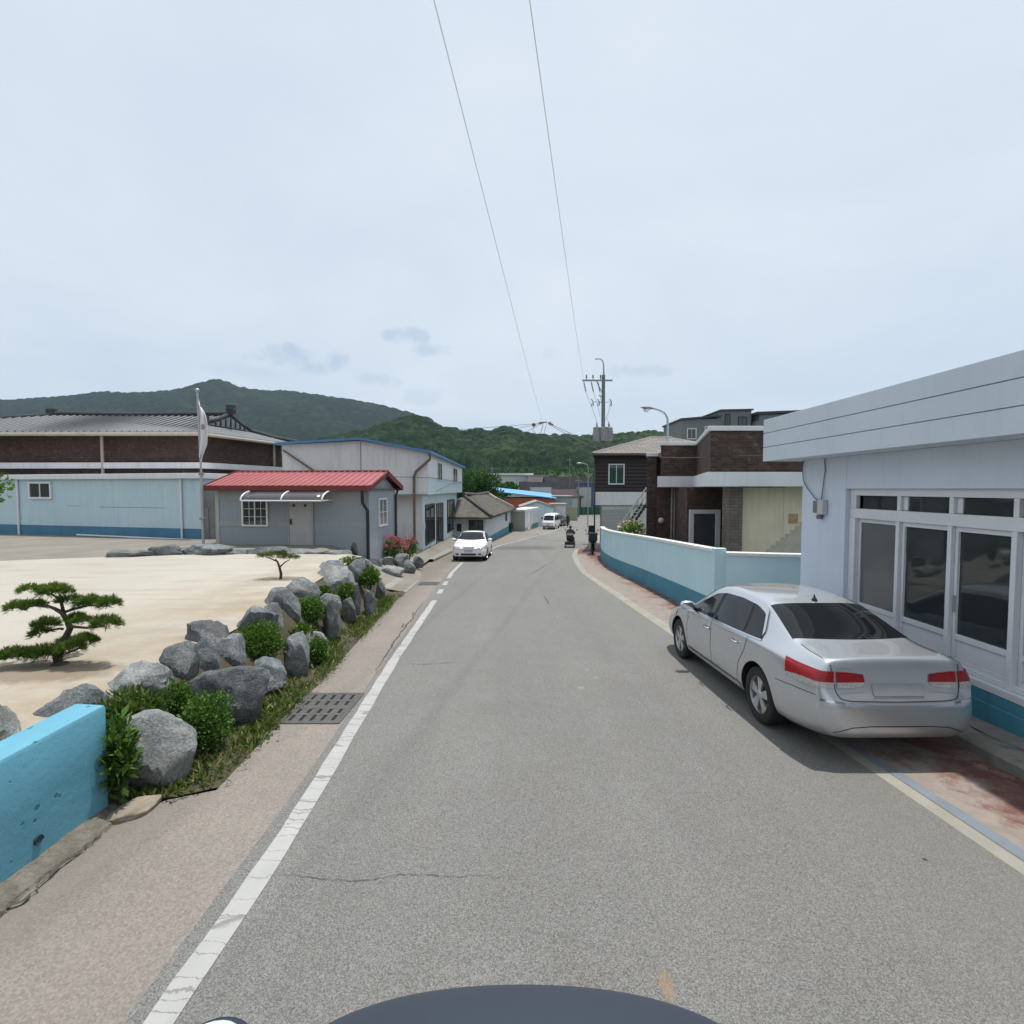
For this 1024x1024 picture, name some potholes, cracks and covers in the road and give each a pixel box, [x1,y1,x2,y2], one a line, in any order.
drain grate [276,693,364,724]
crack [255,873,522,881]
